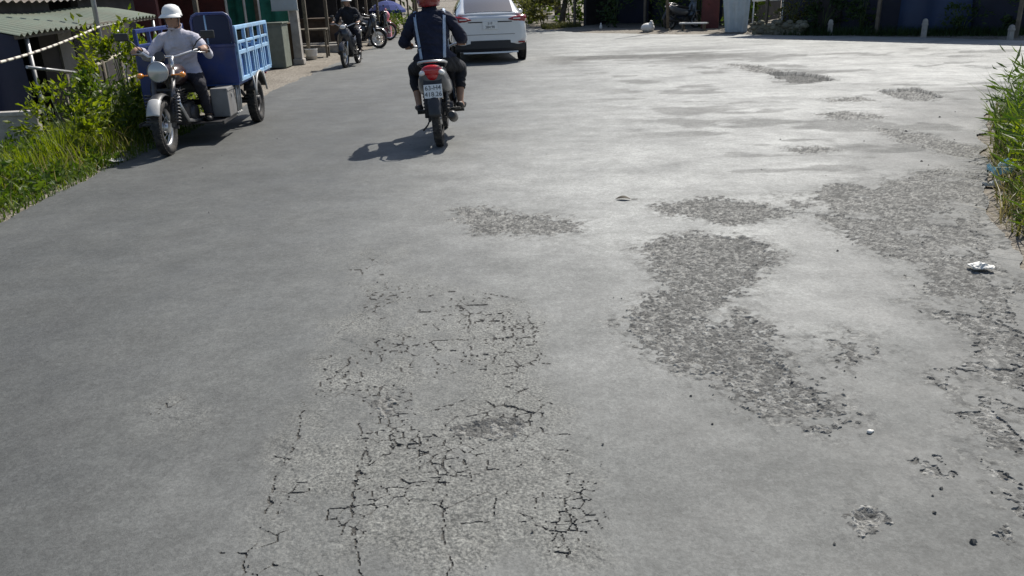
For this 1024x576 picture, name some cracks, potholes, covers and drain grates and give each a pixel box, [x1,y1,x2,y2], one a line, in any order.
pothole [841,504,895,539]
pothole [878,87,943,101]
pothole [767,69,834,84]
pothole [445,204,585,239]
pothole [649,195,804,227]
pothole [607,229,865,437]
crack [219,254,610,576]
